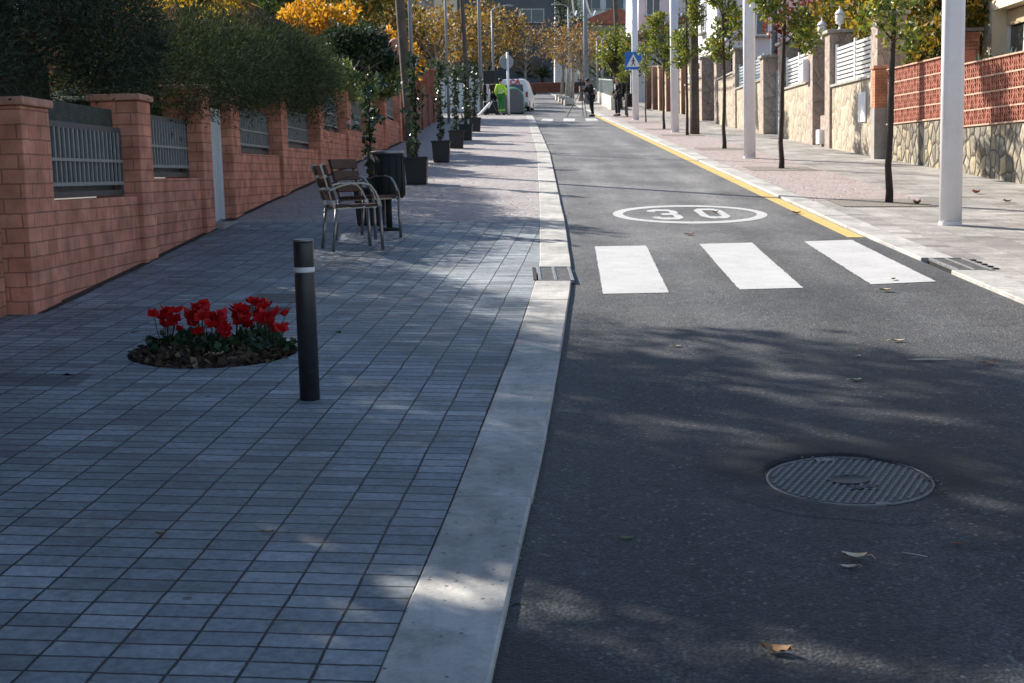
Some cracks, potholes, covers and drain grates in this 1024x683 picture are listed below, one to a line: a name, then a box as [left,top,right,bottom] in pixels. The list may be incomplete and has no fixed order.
drain grate [928,257,995,274]
drain grate [537,266,574,285]
manhole cover [715,443,988,525]
